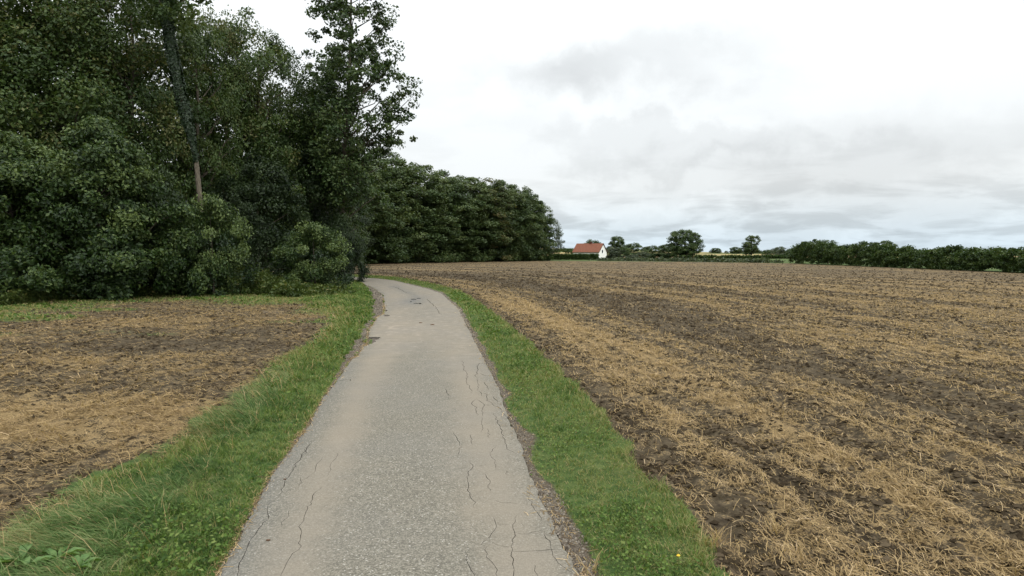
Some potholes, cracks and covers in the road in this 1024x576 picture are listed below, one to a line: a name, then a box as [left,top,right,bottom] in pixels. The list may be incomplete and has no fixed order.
crack [237,441,338,575]
crack [453,362,513,504]
crack [466,498,571,576]
